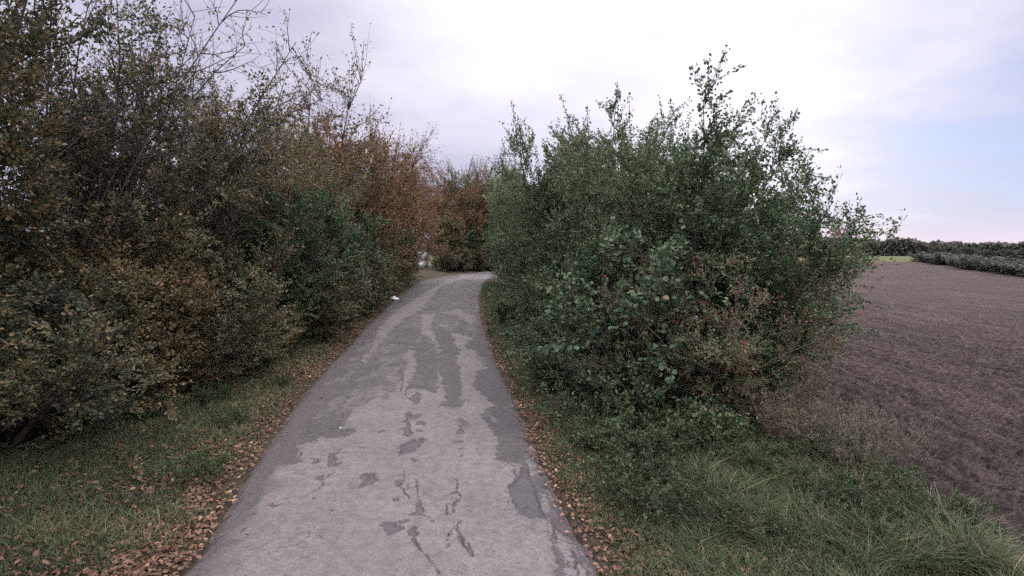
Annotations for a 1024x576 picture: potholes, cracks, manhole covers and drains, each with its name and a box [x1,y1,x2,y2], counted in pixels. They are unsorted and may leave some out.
crack [399,469,475,574]
